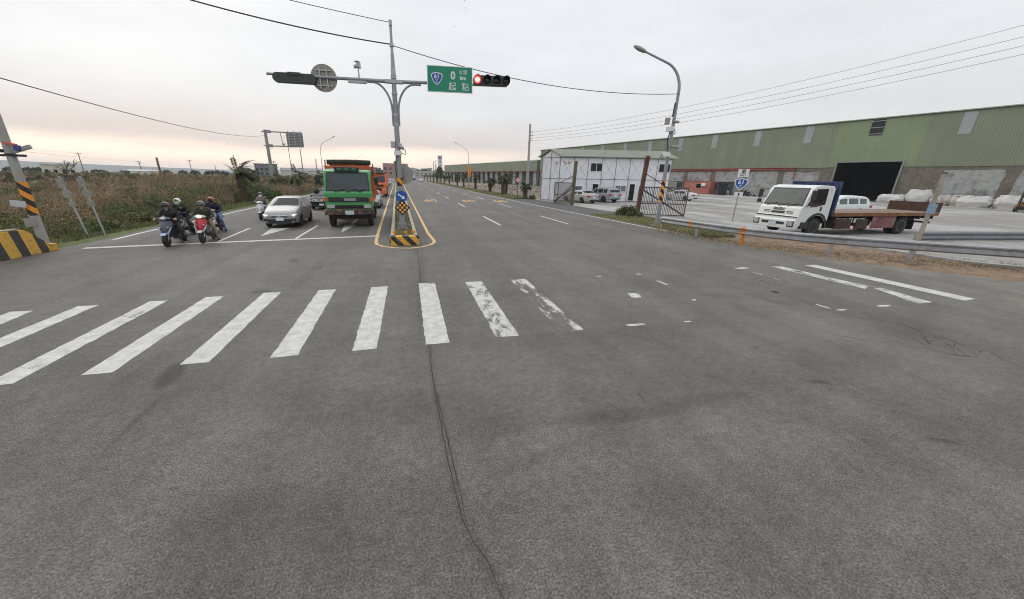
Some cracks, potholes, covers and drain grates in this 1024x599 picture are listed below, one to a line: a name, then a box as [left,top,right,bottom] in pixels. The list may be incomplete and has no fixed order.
crack [853,314,1022,367]
